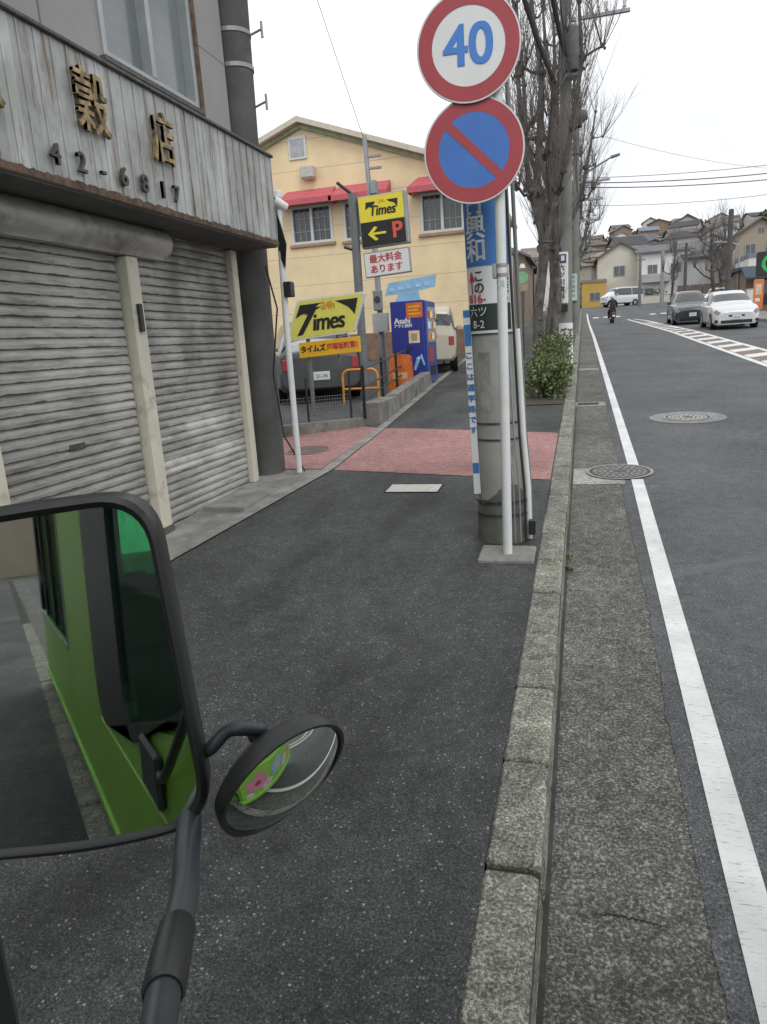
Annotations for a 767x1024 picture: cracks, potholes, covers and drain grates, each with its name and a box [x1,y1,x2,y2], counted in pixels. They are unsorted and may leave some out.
utility cover [384,484,444,493]
manhole cover [586,464,654,479]
manhole cover [649,411,727,423]
crack [592,913,669,928]
manhole cover [286,445,330,454]
